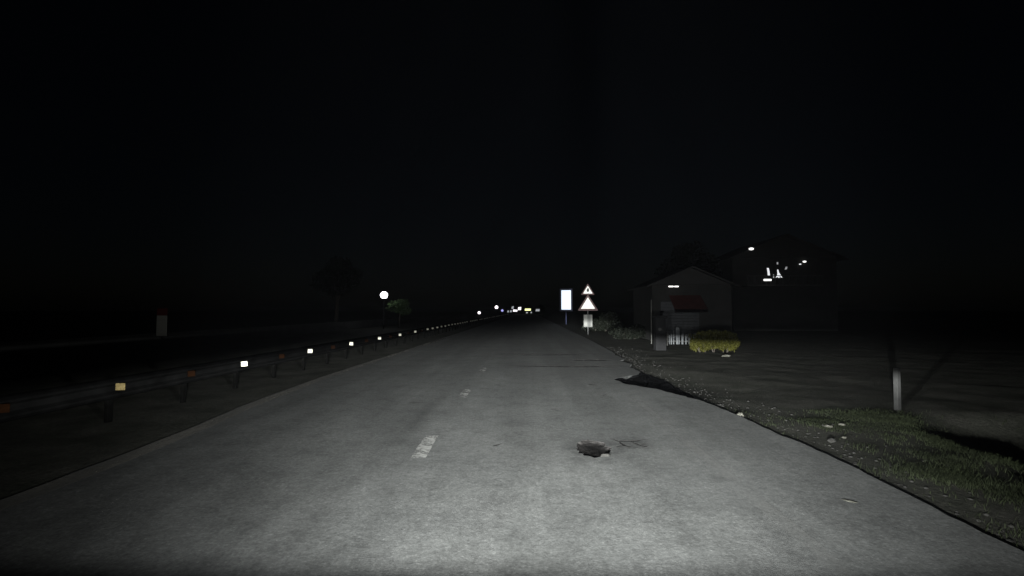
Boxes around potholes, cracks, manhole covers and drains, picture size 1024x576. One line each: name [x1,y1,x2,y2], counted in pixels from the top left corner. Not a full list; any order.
pothole [576,440,612,458]
crack [612,439,647,448]
pothole [614,372,699,400]
